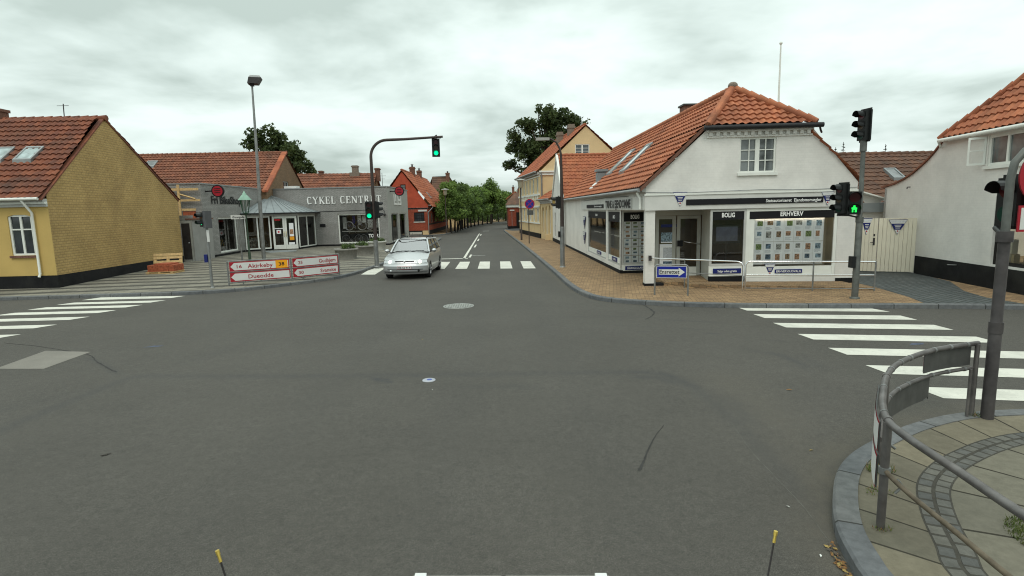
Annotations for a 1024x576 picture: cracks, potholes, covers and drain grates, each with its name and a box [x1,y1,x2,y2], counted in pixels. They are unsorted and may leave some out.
crack [638,425,664,471]
